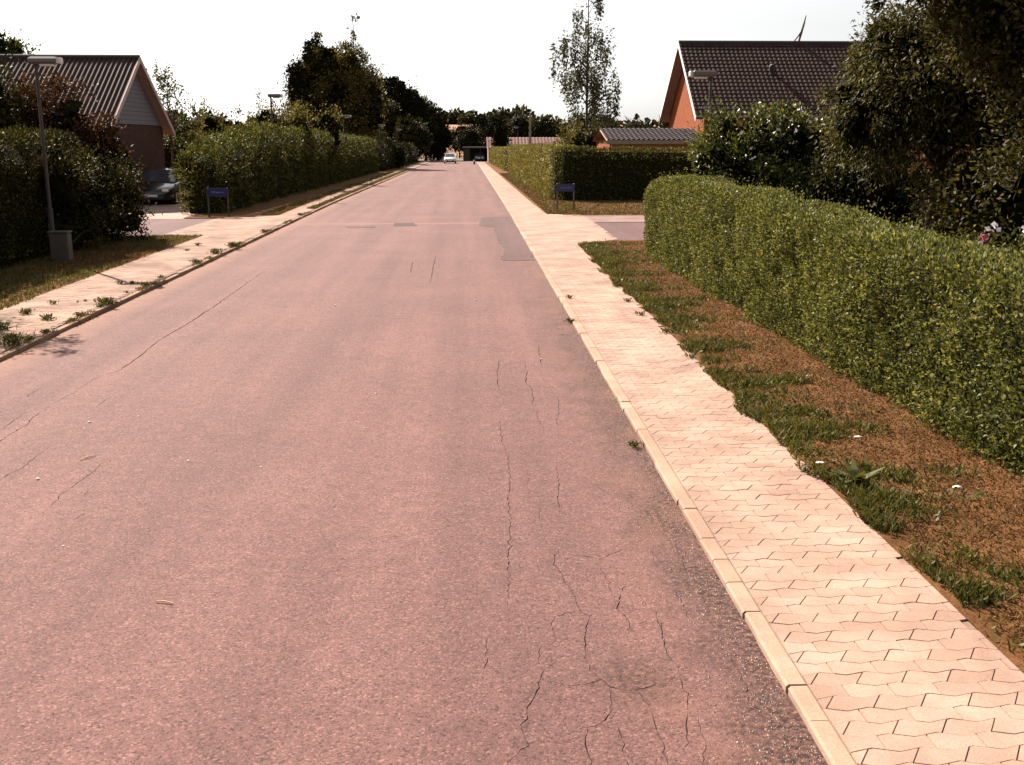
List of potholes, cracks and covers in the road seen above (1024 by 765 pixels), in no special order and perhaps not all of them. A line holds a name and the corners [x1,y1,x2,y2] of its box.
crack [525,346,560,432]
crack [507,541,707,765]
crack [499,422,561,610]
